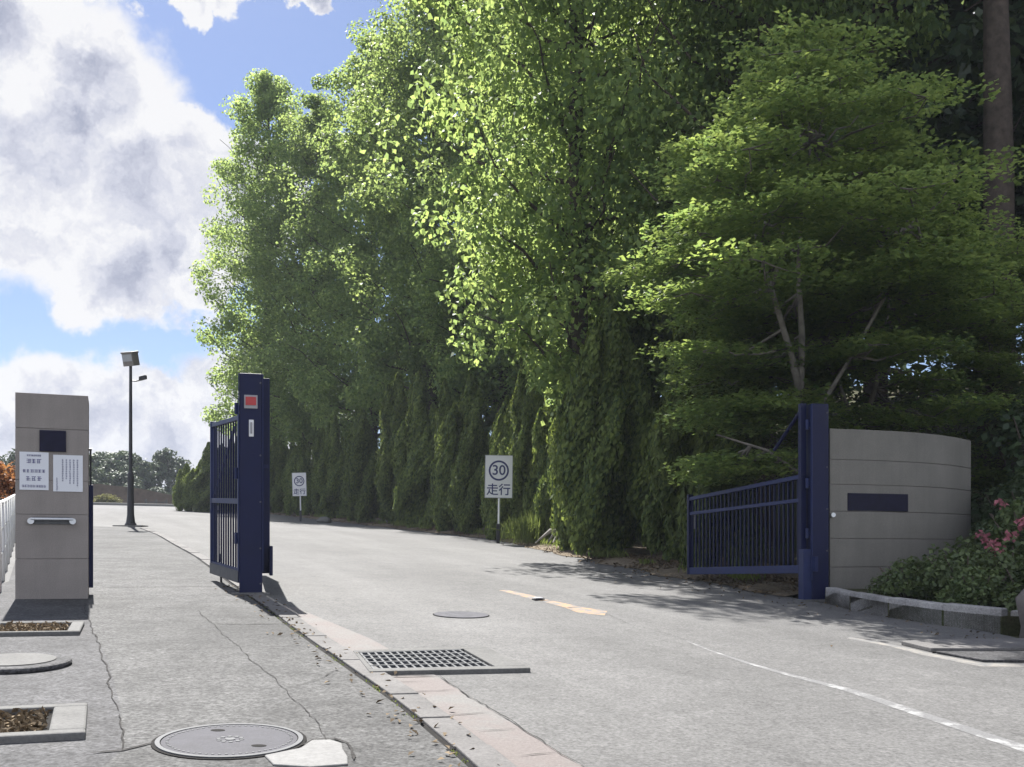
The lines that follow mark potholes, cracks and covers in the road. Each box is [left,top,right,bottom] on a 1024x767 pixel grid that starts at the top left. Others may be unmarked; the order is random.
manhole cover [0,652,72,674]
drain grate [353,646,530,675]
manhole cover [151,723,307,760]
crack [200,612,356,759]
crack [84,603,155,753]
